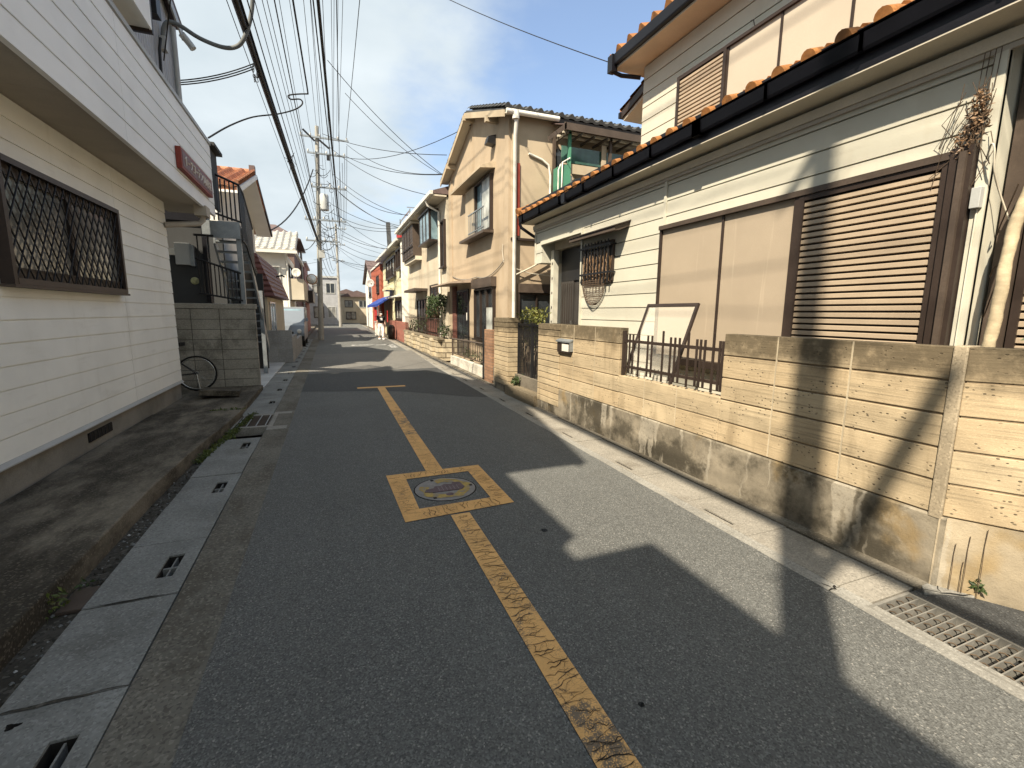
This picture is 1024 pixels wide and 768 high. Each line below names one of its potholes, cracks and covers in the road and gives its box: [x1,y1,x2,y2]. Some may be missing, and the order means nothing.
drain grate [868,592,1024,691]
manhole cover [414,477,476,501]
drain grate [230,413,278,437]
